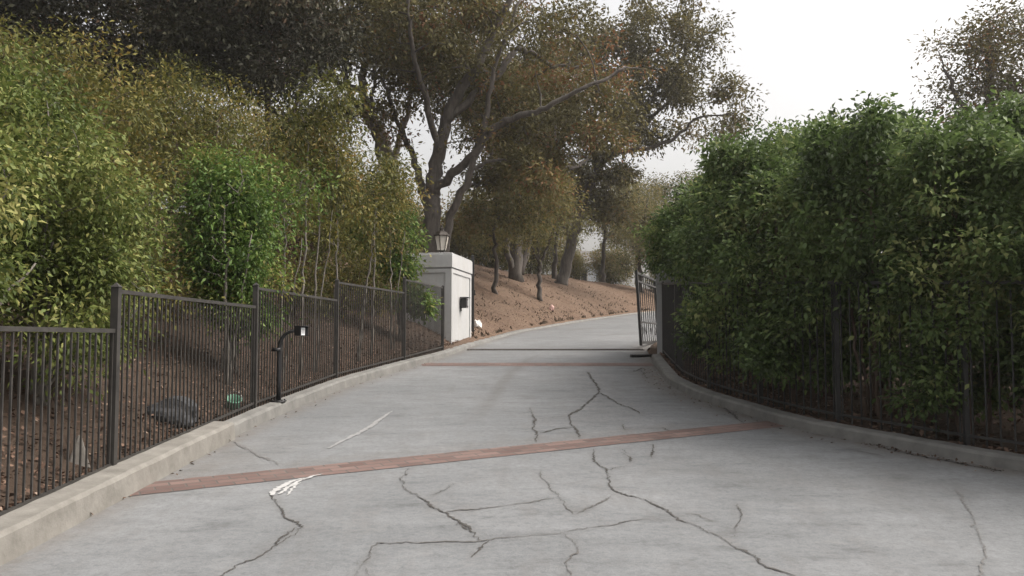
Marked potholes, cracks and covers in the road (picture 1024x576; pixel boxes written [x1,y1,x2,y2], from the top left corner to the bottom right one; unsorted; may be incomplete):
crack [220,495,303,576]
crack [956,490,988,576]
crack [530,372,640,441]
crack [234,442,277,464]
crack [354,449,795,576]
